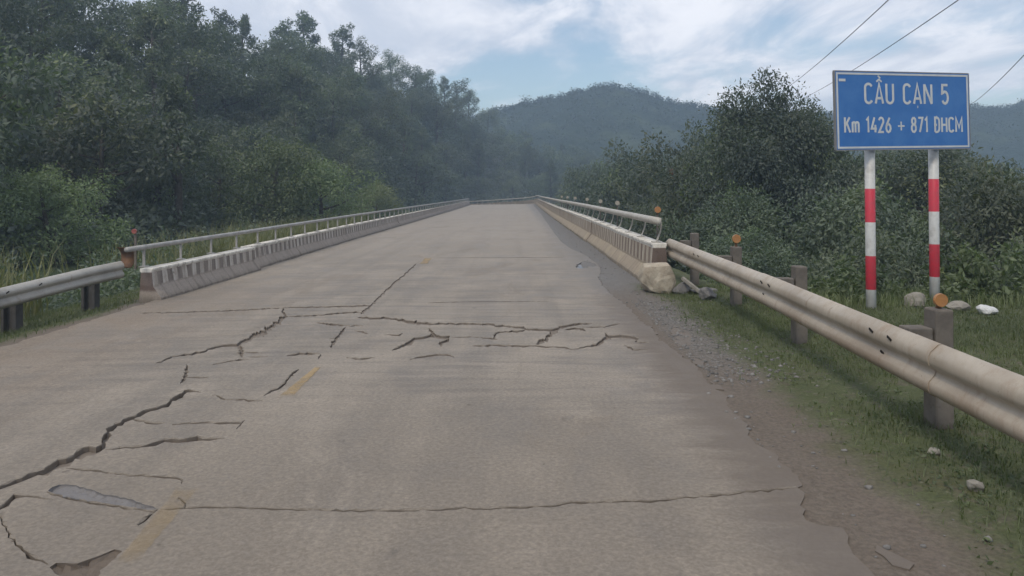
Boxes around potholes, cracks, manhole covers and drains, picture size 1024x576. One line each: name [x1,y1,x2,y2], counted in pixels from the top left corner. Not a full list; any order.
pothole [50,549,122,576]
pothole [48,484,156,510]
crack [0,264,797,565]
